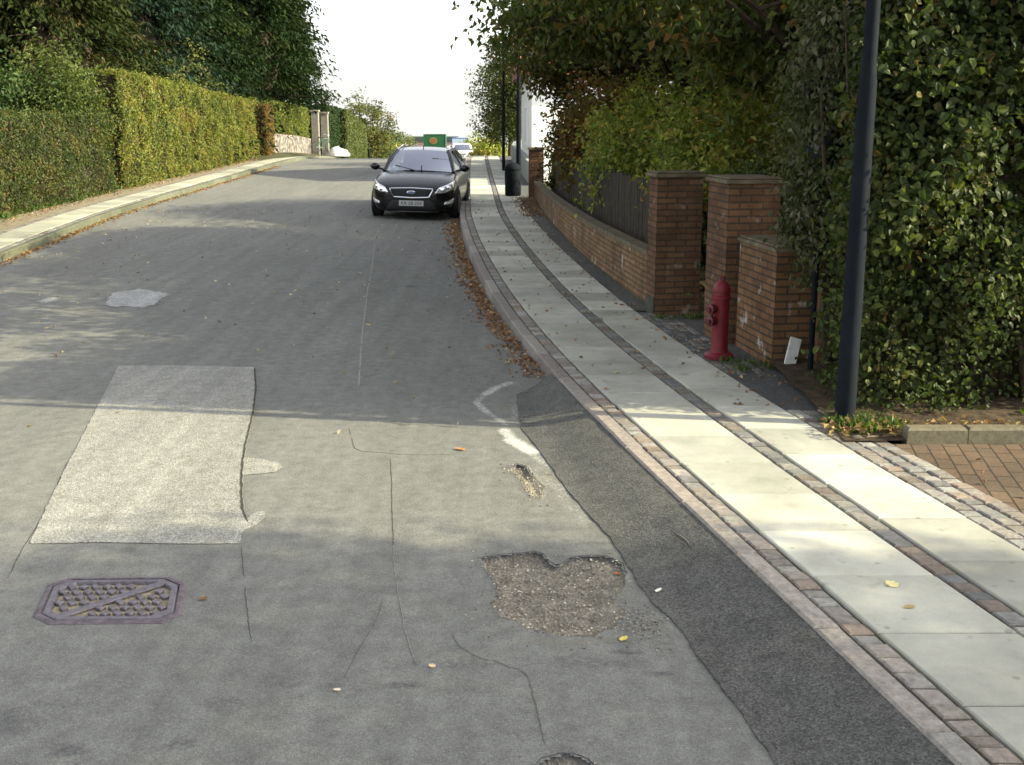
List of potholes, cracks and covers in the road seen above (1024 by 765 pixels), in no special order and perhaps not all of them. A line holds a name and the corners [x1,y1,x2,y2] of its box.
manhole cover [33,577,186,625]
pothole [465,547,676,651]
crack [241,547,252,641]
pothole [500,461,553,507]
crack [8,462,68,578]
crack [349,429,442,455]
crack [344,602,383,678]
crack [453,636,546,745]
